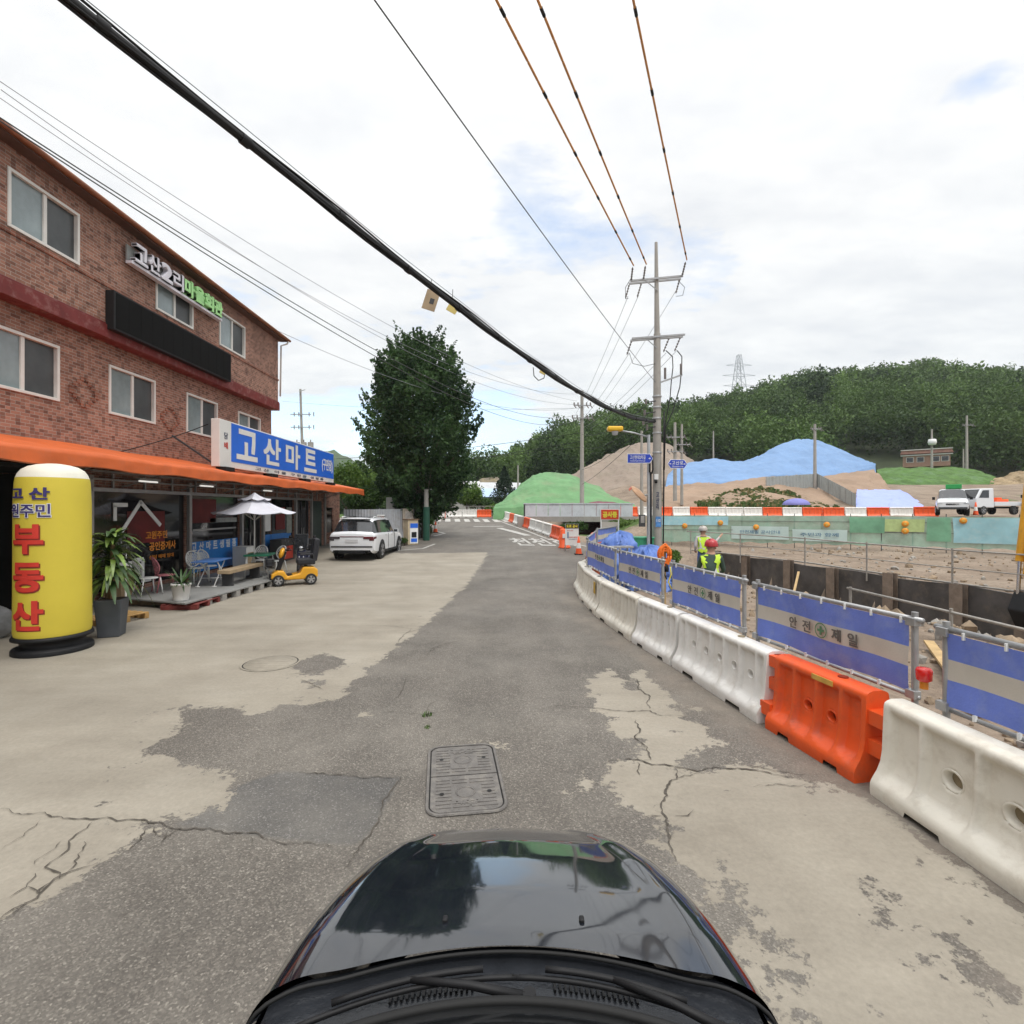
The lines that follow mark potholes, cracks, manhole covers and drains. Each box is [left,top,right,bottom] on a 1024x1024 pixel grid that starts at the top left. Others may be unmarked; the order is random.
manhole cover [425,743,508,817]
crack [305,772,404,867]
crack [389,680,811,860]
manhole cover [240,655,301,672]
crack [1,808,333,919]
